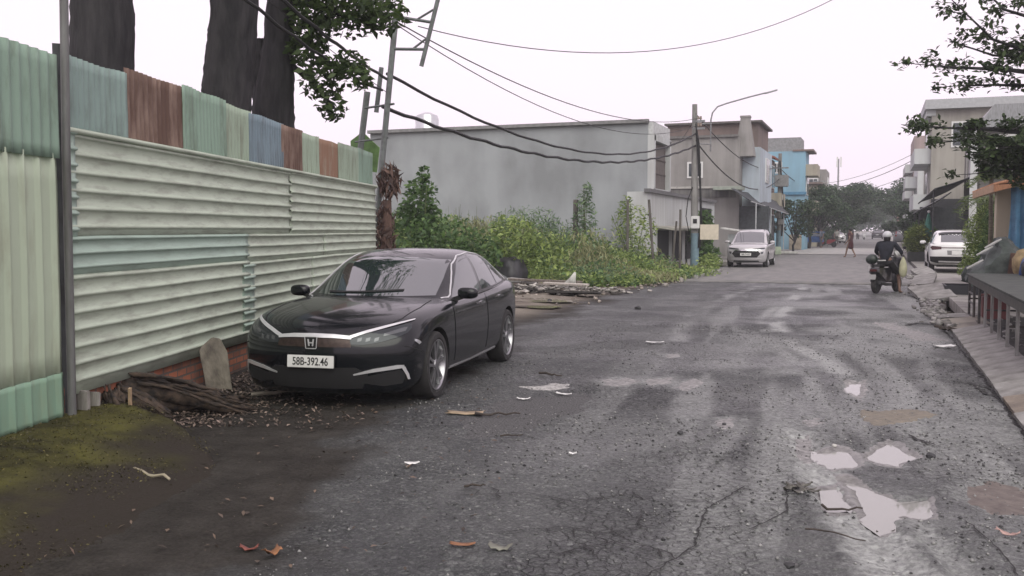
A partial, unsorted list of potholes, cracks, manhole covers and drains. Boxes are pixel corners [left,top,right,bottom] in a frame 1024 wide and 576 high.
crack [952,520,1024,575]
pothole [833,474,939,539]
crack [463,486,815,576]
pothole [843,379,869,401]
pothole [814,485,851,517]
pothole [815,444,865,472]
pothole [861,439,923,468]
